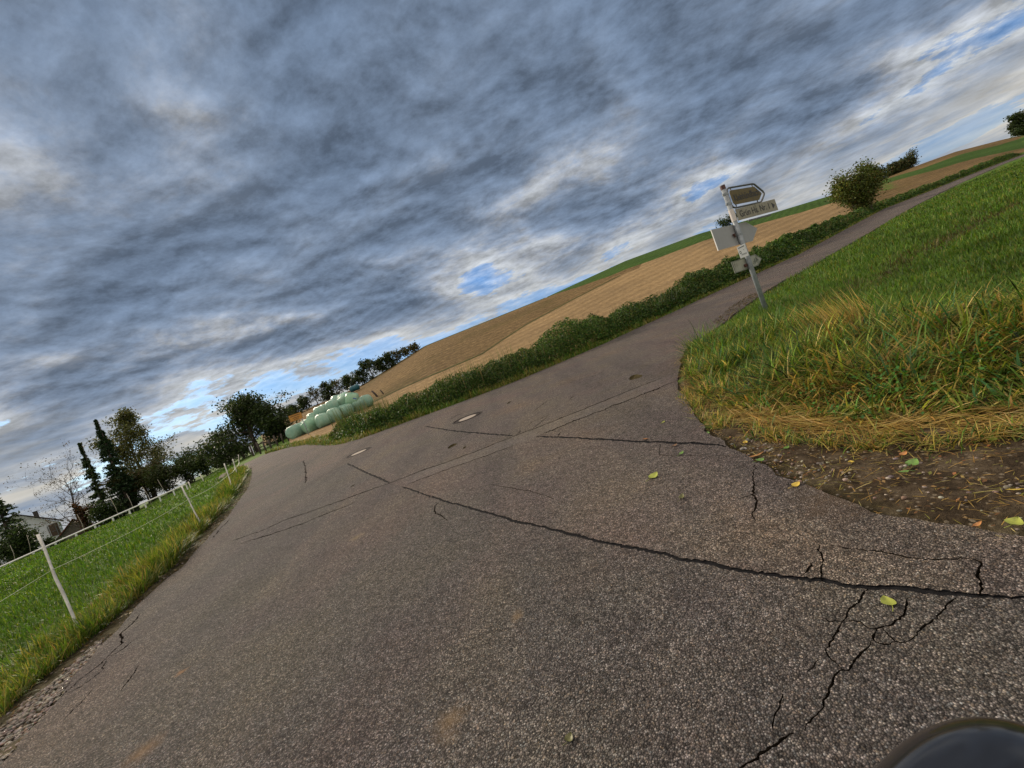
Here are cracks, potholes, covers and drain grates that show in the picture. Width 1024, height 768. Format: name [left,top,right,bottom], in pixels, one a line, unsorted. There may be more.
crack [740,465,758,521]
crack [740,545,984,768]
manhole cover [452,411,482,424]
crack [61,614,140,716]
